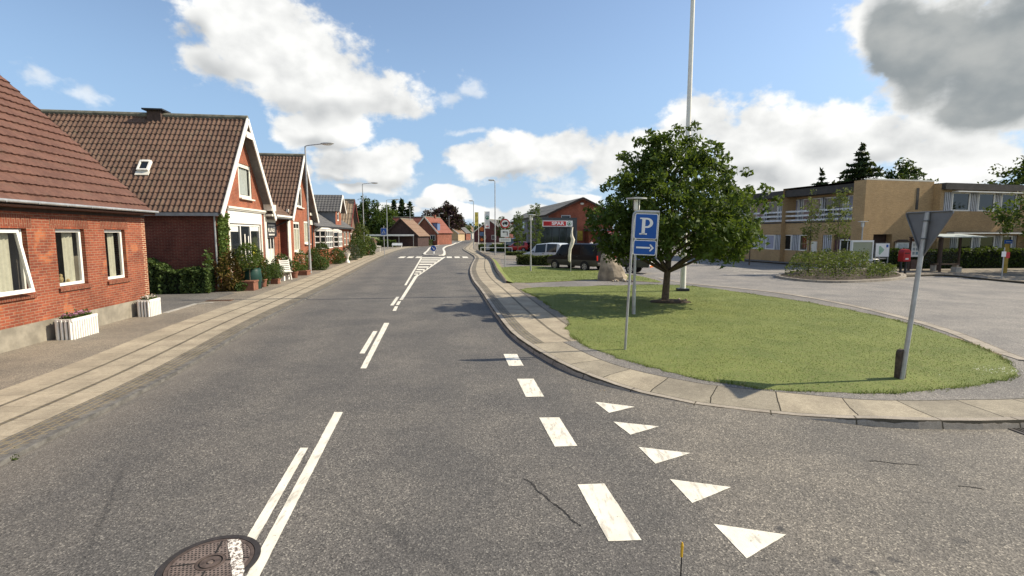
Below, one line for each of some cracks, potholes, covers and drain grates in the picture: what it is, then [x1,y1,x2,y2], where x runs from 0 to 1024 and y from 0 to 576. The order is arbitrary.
crack [523,478,581,526]
manhole cover [155,535,261,576]
